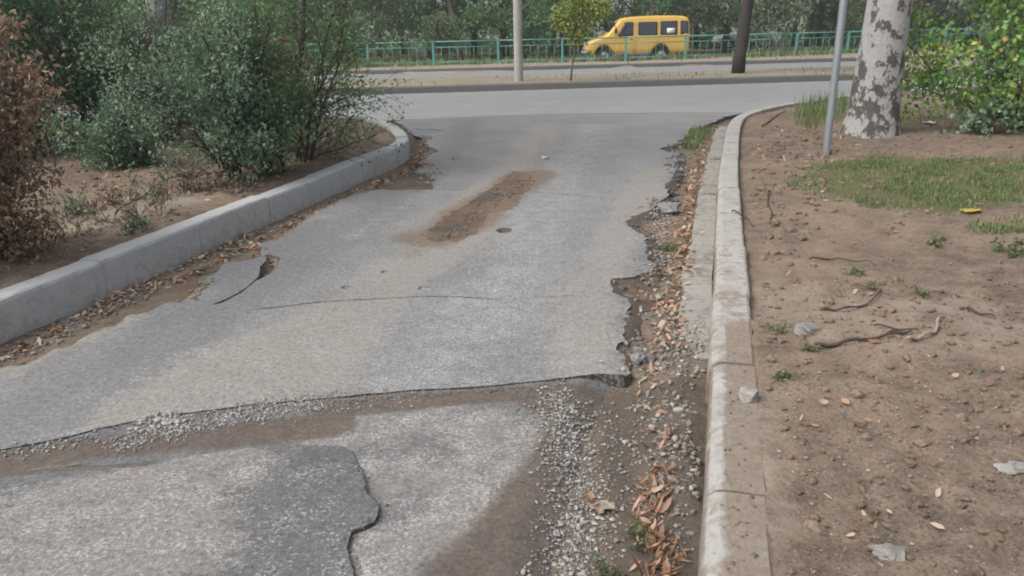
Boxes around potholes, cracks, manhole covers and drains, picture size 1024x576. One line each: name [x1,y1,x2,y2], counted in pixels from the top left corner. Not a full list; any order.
crack [218,256,280,304]
pothole [424,171,534,242]
